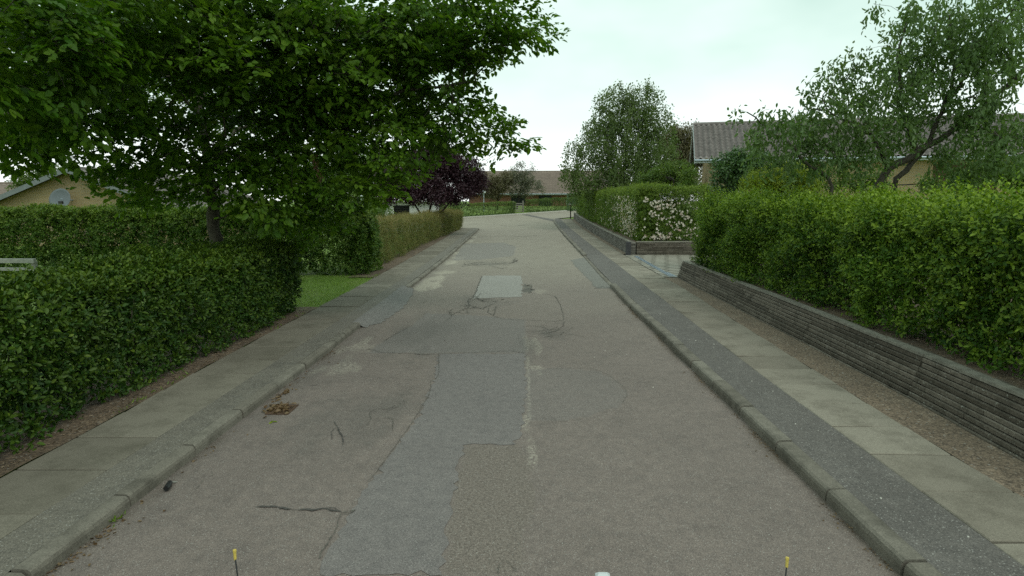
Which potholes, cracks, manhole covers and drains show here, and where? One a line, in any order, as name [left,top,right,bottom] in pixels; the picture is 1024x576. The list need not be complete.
crack [255,302,439,558]
drain grate [265,404,299,415]
crack [442,258,581,339]
